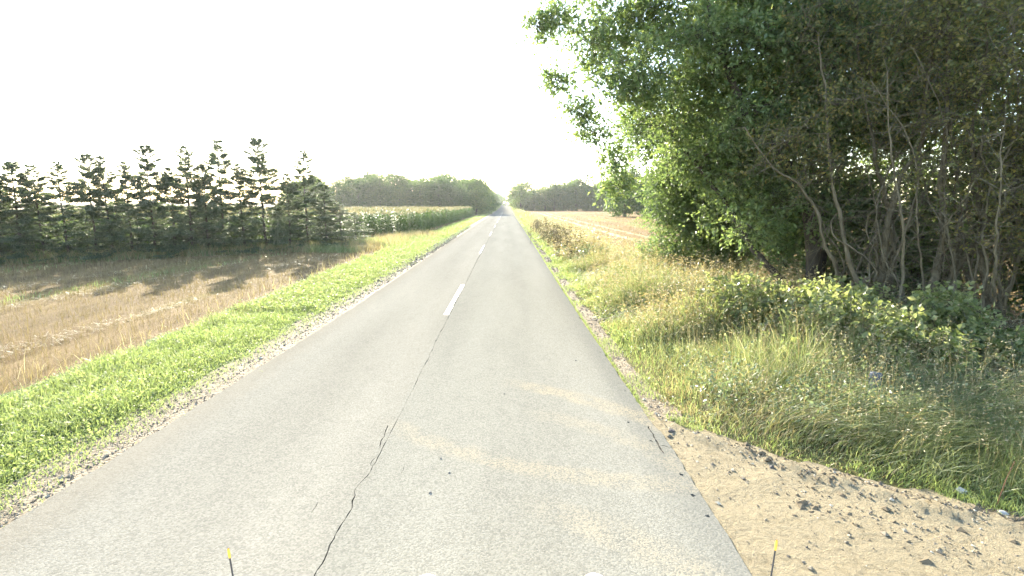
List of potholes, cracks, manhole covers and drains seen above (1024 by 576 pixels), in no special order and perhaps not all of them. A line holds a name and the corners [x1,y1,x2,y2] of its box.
crack [314,226,496,576]
